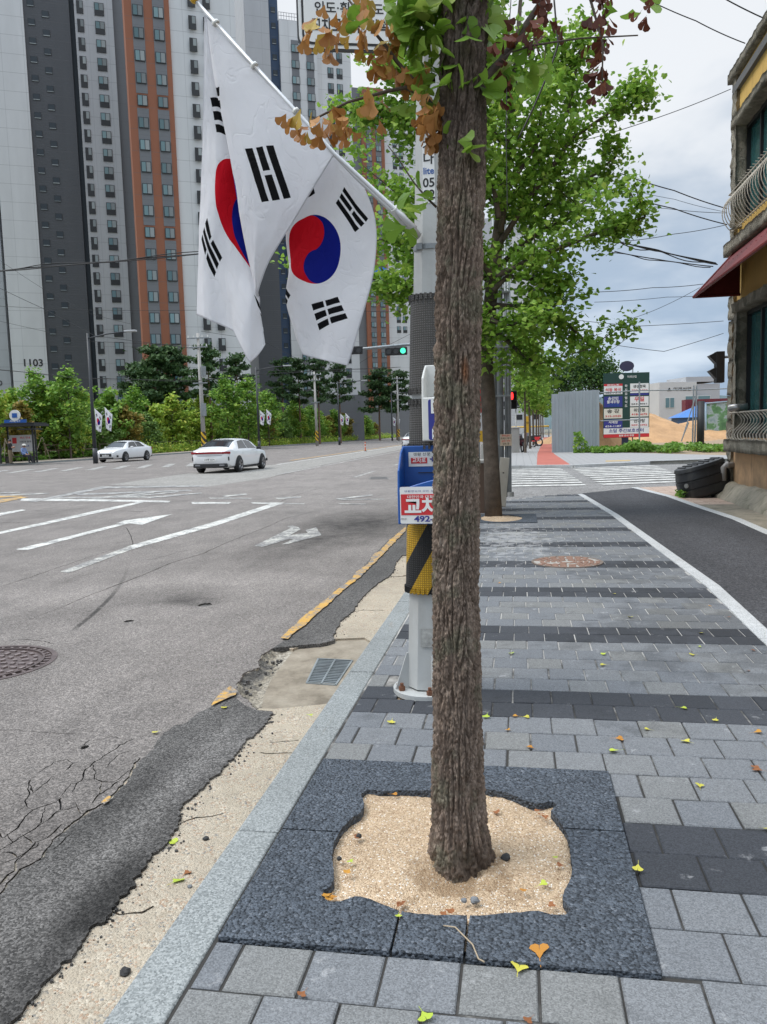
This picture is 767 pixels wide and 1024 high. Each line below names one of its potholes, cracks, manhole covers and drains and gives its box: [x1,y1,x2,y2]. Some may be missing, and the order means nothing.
drain grate [306,658,353,686]
manhole cover [531,556,603,568]
pothole [237,650,292,710]
manhole cover [0,645,58,680]
crack [0,730,140,892]
